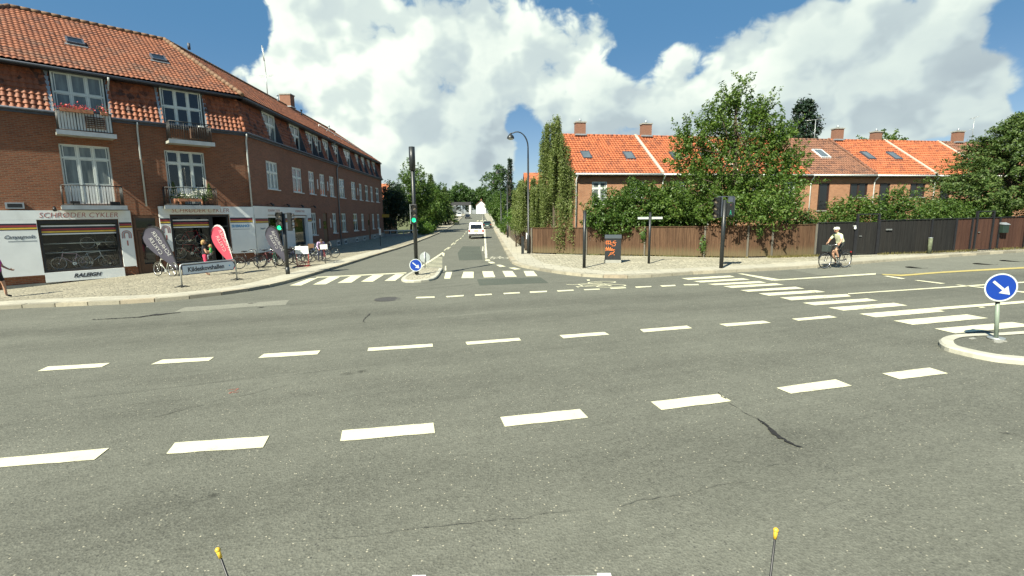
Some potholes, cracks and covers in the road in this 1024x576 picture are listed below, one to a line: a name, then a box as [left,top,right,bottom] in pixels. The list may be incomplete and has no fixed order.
crack [718,392,802,465]
